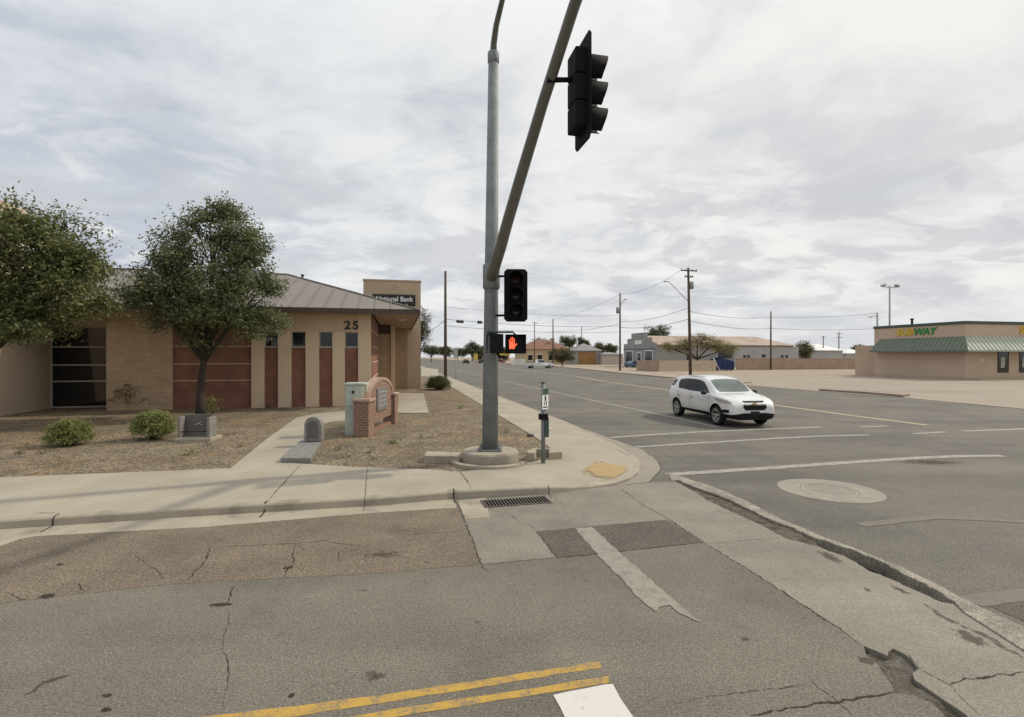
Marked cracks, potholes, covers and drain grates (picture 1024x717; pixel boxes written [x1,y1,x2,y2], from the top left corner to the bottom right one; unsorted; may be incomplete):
crack [676,682,894,716]
pothole [867,651,961,717]
drain grate [480,496,552,508]
manhole cover [777,479,887,503]
crack [26,674,71,695]
crack [222,587,234,704]
crack [188,540,358,579]
